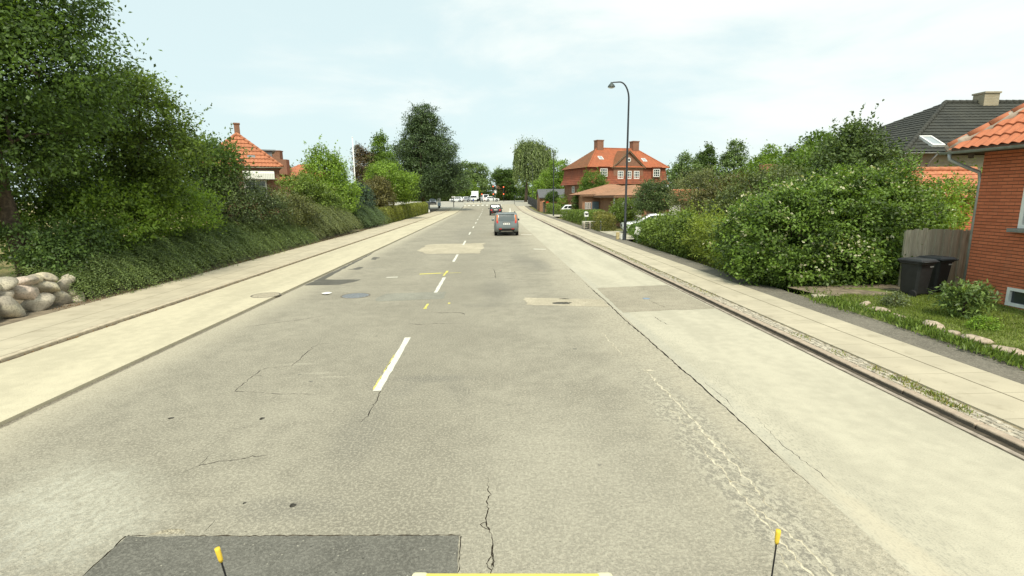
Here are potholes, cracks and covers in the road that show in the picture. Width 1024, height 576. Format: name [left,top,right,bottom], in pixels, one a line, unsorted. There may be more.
crack [235,343,331,395]
crack [480,479,495,573]
crack [570,269,840,576]
